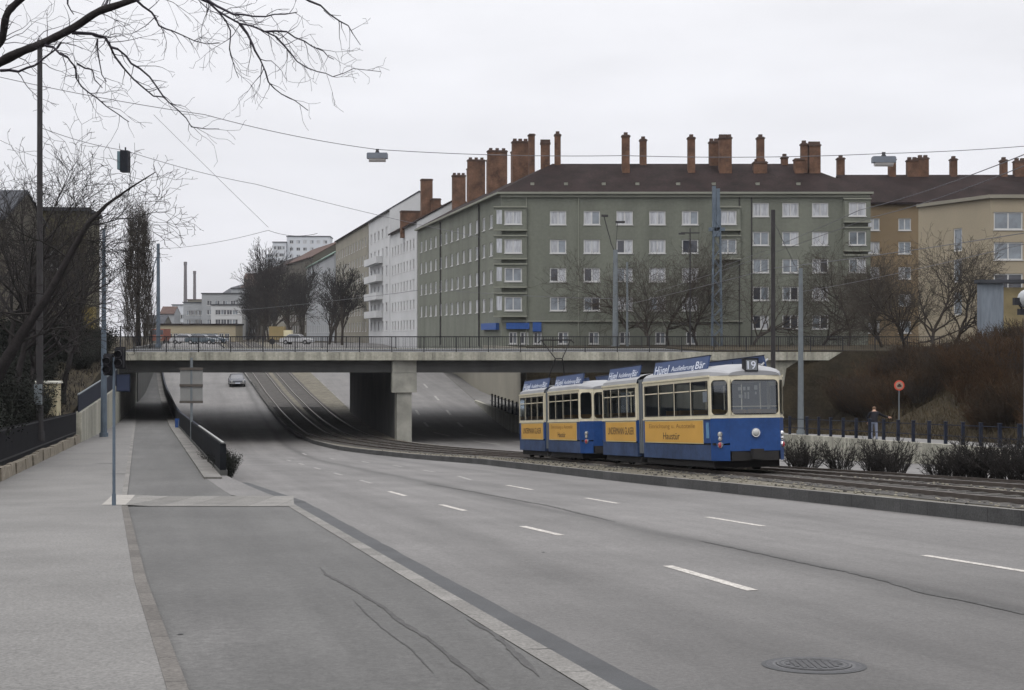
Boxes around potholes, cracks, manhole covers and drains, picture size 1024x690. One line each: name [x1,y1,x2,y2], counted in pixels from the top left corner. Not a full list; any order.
manhole cover [761,657,867,674]
crack [320,567,495,690]
